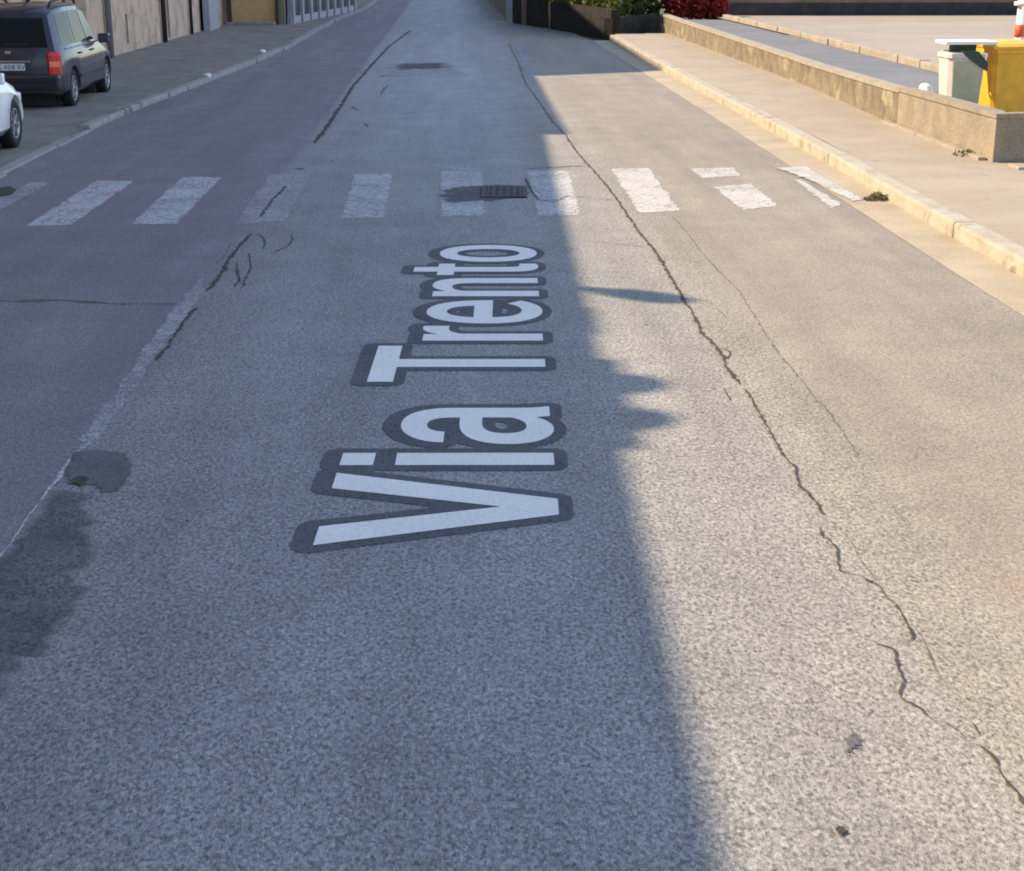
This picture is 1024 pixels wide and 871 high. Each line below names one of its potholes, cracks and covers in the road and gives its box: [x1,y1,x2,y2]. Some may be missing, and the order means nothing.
crack [217,186,294,288]
crack [508,43,1024,803]
crack [154,307,198,361]
pothole [844,731,862,753]
